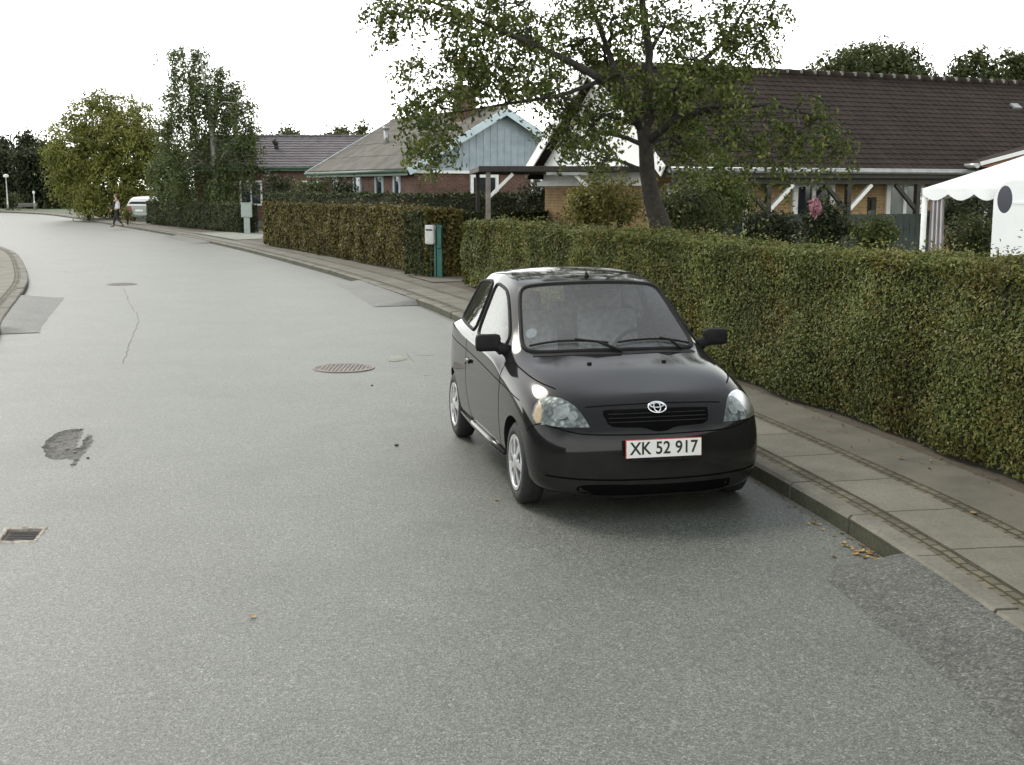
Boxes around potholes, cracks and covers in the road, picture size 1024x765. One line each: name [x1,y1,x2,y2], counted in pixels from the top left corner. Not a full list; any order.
pothole [41,429,93,468]
manhole cover [312,363,375,373]
crack [123,289,140,363]
